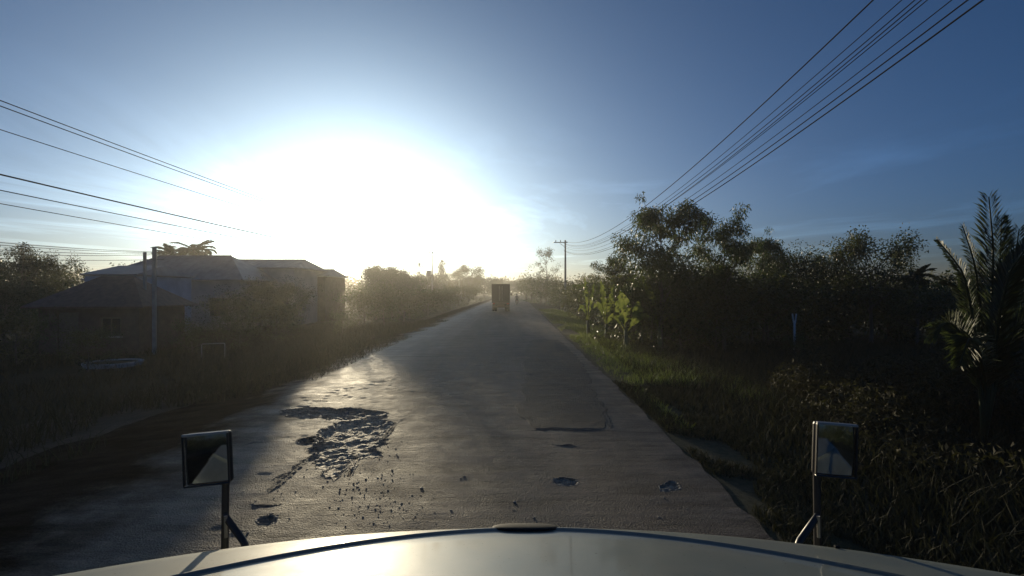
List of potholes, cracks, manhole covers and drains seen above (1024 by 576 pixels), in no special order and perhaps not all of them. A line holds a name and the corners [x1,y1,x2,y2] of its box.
pothole [658,480,682,492]
crack [531,397,613,448]
pothole [279,407,388,420]
pothole [254,515,281,526]
pothole [306,418,396,481]
pothole [295,436,326,445]
pothole [549,477,581,486]
